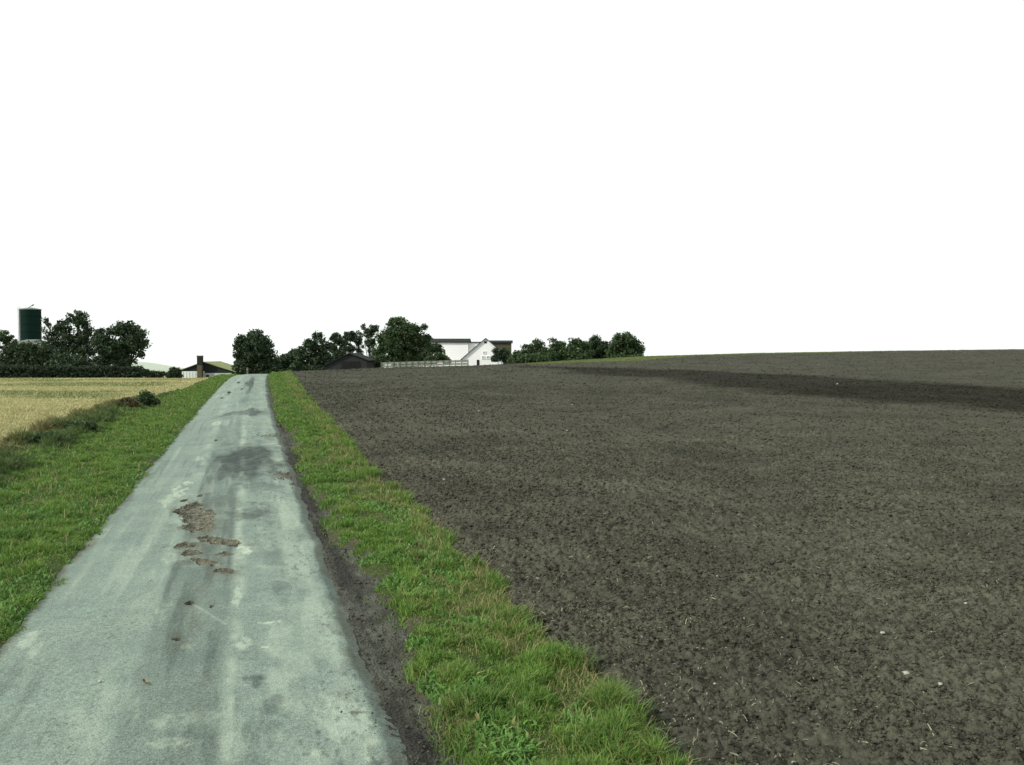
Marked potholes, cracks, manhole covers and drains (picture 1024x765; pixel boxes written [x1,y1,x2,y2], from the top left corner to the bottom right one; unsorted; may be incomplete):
pothole [197,535,242,547]
pothole [173,502,216,533]
pothole [190,558,219,567]
pothole [174,542,199,550]
